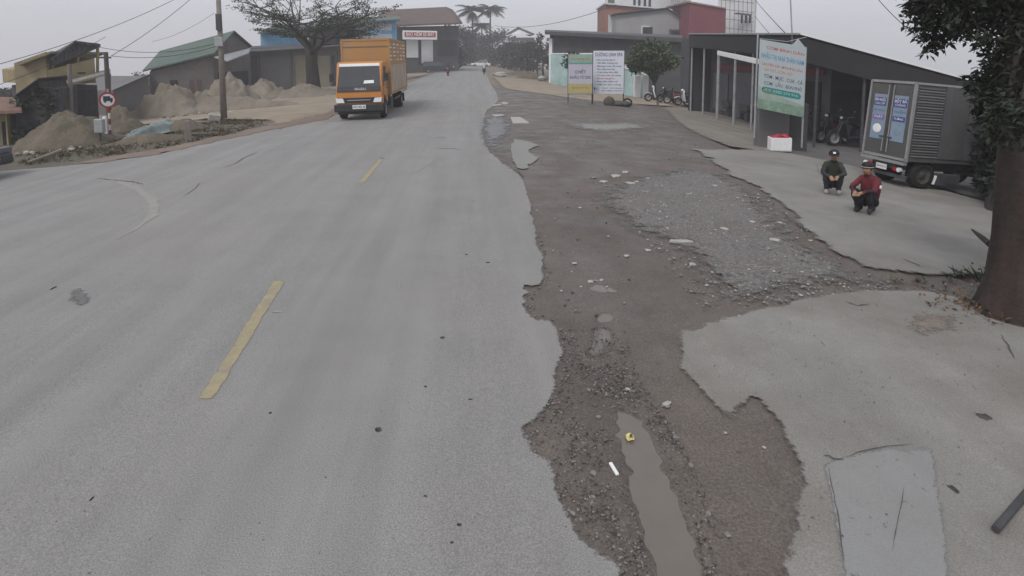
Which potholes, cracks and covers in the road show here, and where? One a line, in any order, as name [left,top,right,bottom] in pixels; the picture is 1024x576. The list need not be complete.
crack [825,444,905,561]
